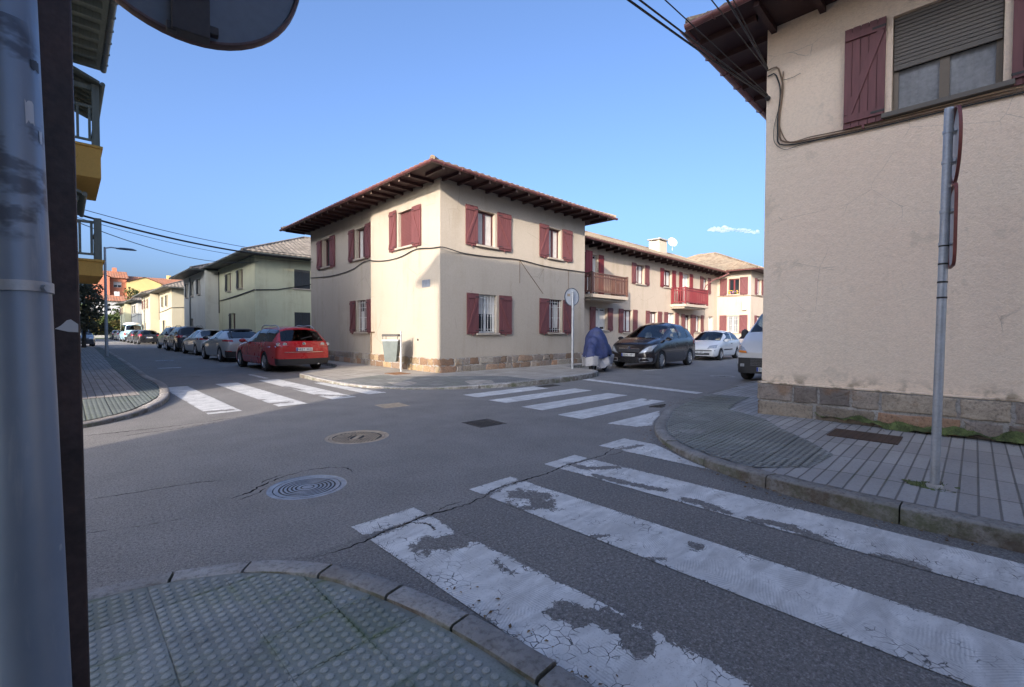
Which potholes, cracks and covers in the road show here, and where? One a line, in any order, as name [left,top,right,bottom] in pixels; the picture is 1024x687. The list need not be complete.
manhole cover [324,430,389,444]
utility cover [827,428,903,445]
manhole cover [462,419,507,428]
crack [87,467,352,500]
